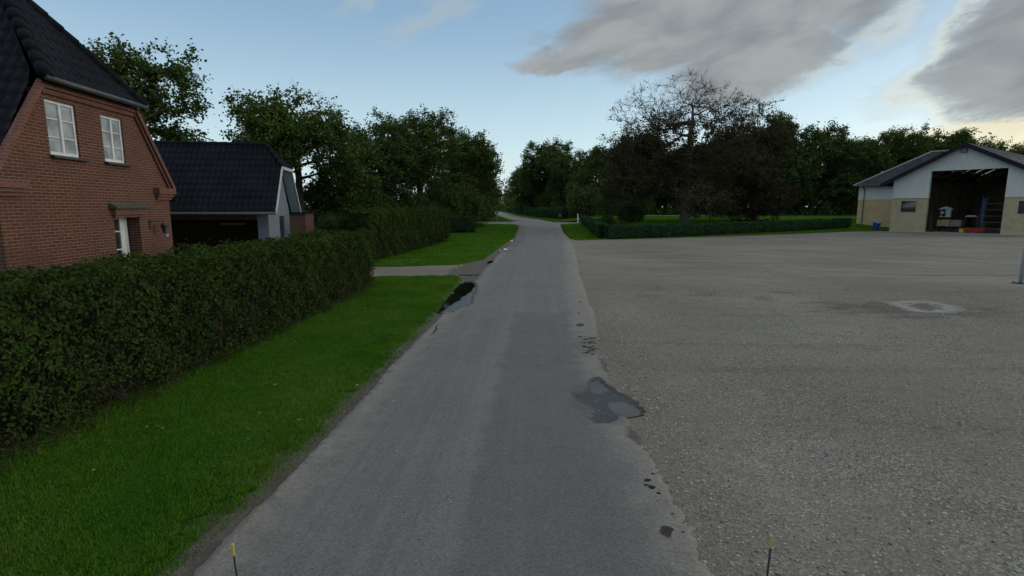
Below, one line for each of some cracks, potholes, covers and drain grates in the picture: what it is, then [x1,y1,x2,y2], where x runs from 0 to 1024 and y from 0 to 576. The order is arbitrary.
pothole [572,377,645,424]
pothole [433,281,478,314]
pothole [659,526,674,538]
